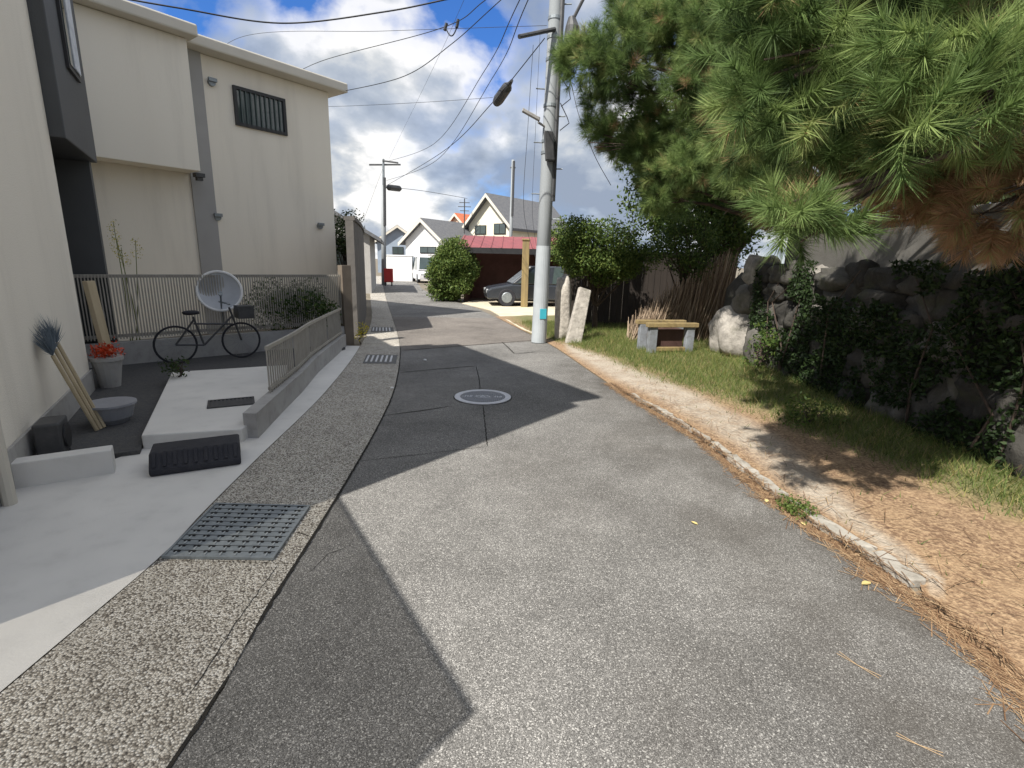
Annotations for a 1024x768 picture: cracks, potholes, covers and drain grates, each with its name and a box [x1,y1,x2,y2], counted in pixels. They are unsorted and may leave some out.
crack [183,566,277,703]
drain grate [363,354,398,364]
manhole cover [453,389,512,405]
drain grate [161,503,310,561]
drain grate [207,396,255,409]
